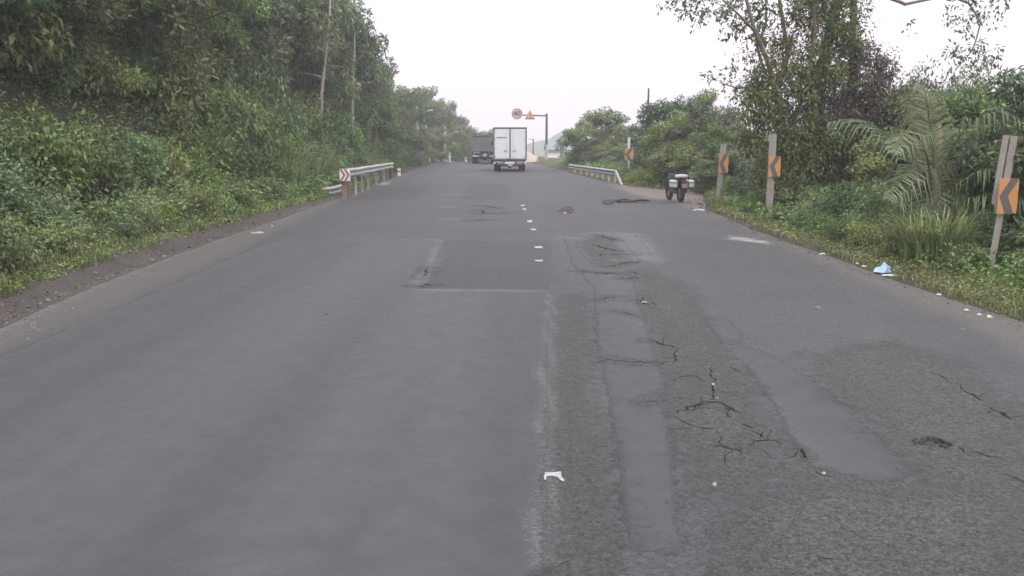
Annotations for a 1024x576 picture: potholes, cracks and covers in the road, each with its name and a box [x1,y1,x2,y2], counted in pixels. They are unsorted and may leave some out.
crack [932,372,1024,420]
crack [956,446,1024,482]
pothole [910,436,953,453]
crack [582,234,652,279]
crack [595,337,834,478]
